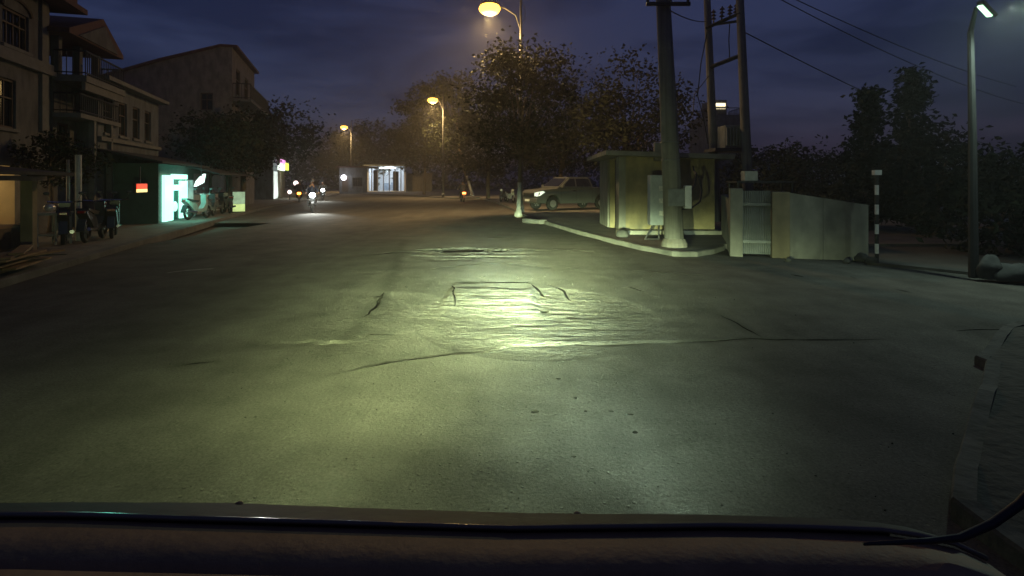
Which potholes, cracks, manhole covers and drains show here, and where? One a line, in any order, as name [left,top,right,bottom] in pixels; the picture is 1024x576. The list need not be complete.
crack [353,317,873,371]
crack [364,293,384,317]
